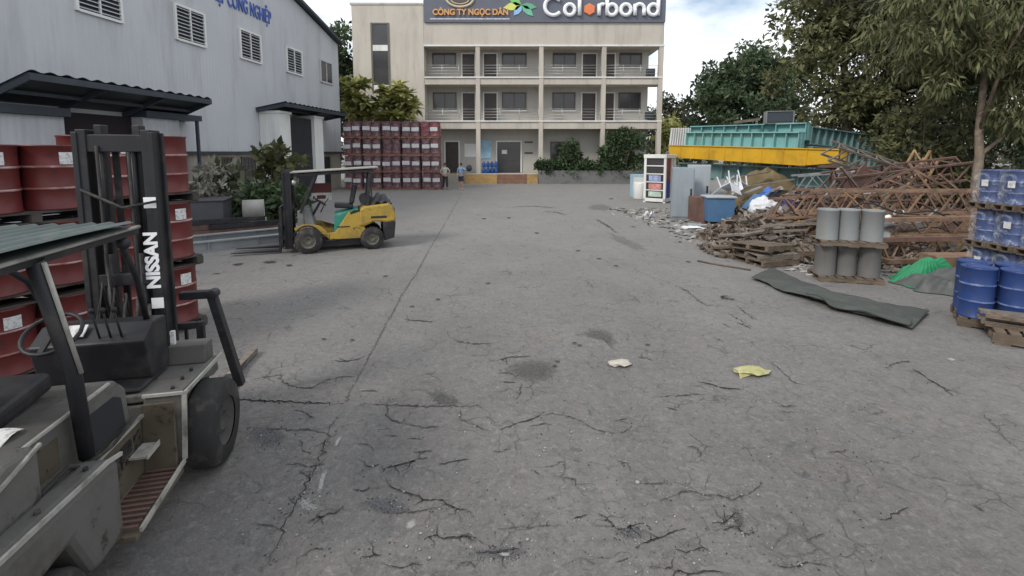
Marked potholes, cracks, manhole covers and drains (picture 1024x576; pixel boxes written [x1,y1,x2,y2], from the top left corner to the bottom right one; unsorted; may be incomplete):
crack [454,339,525,399]
crack [879,507,908,520]
crack [778,557,829,568]
pothole [372,500,403,512]
crack [886,361,959,395]
crack [240,356,772,576]
